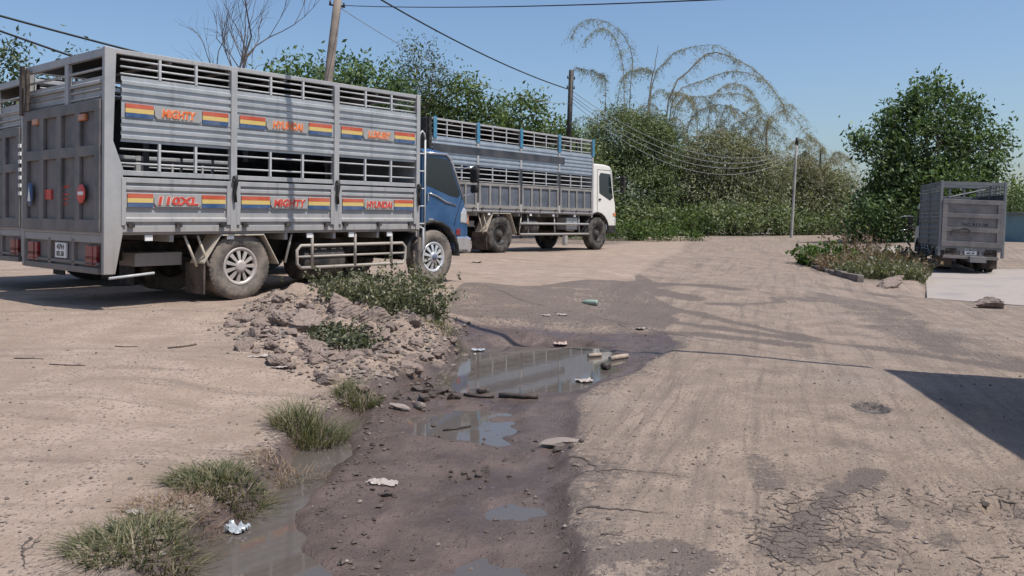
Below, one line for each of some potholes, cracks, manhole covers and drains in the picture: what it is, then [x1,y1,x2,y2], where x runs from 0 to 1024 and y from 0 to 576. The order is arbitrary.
pothole [848,401,893,414]
pothole [424,332,633,394]
crack [742,482,1024,576]
crack [568,448,673,476]
